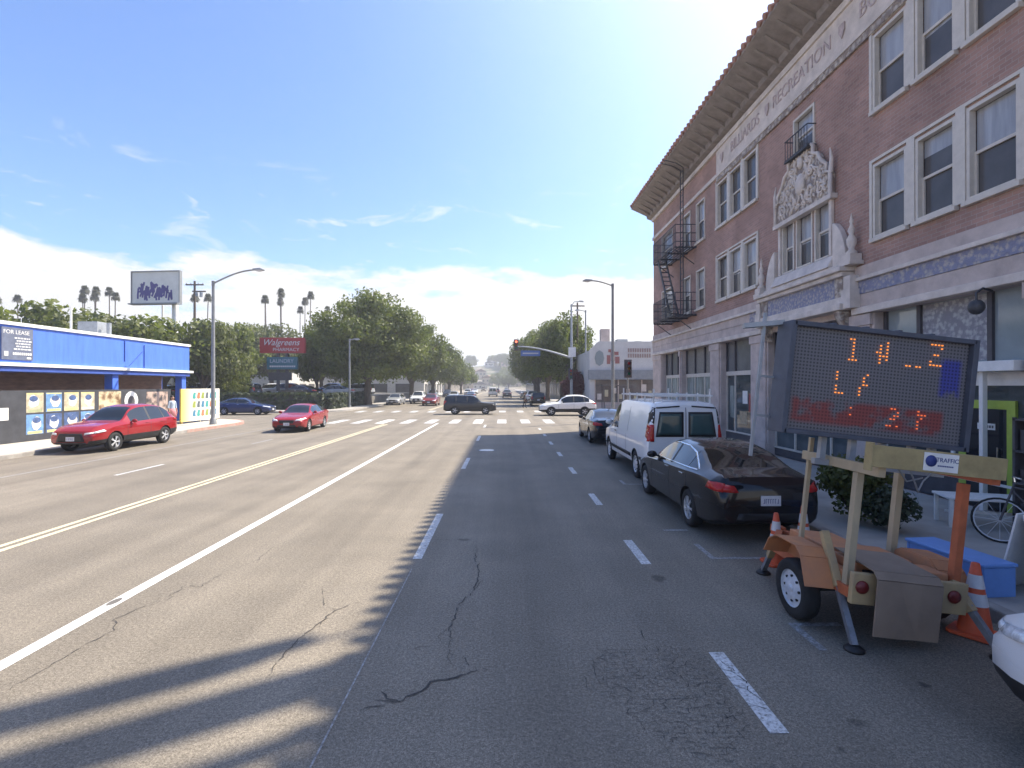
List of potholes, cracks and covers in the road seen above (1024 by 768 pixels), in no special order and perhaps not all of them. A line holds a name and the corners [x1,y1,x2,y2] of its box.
crack [365,539,527,708]
crack [578,630,766,762]
crack [262,586,357,686]
crack [8,578,214,697]
